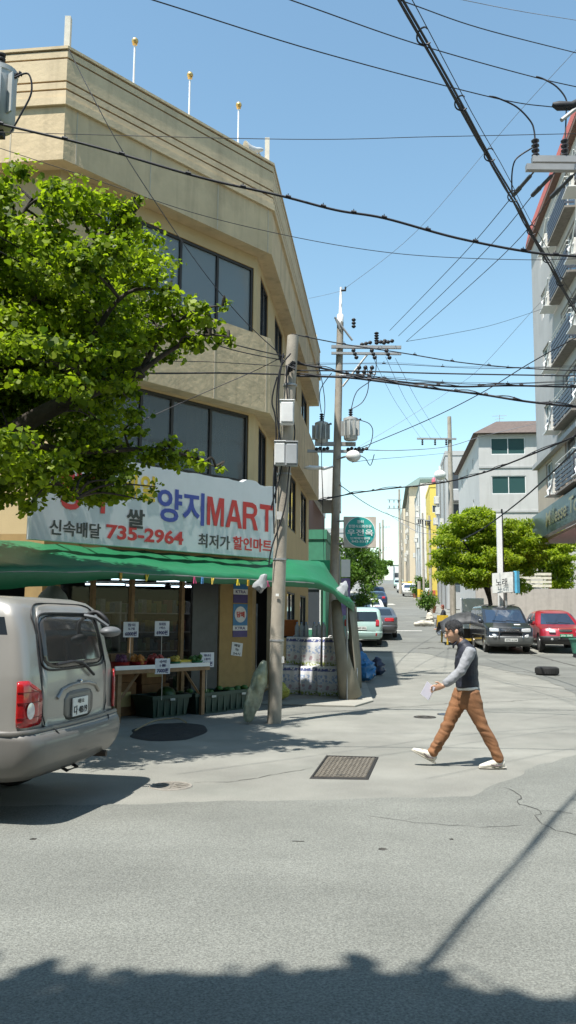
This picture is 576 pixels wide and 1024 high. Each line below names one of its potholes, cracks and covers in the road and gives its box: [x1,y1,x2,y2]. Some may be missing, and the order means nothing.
crack [504,787,576,835]
manhole cover [149,781,193,791]
